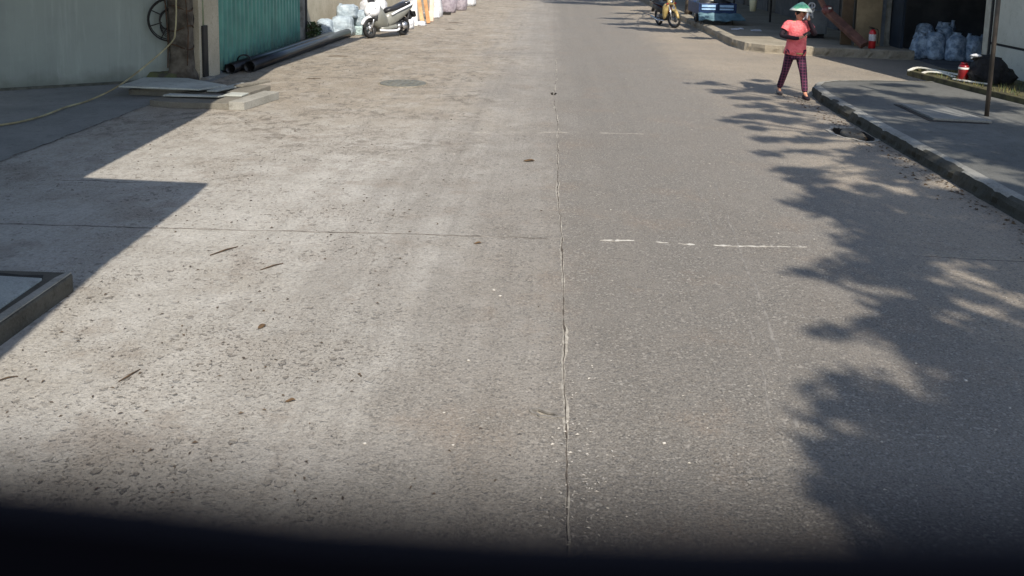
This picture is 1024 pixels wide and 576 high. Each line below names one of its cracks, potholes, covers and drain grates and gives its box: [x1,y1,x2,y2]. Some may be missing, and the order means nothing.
manhole cover [378,79,428,87]
